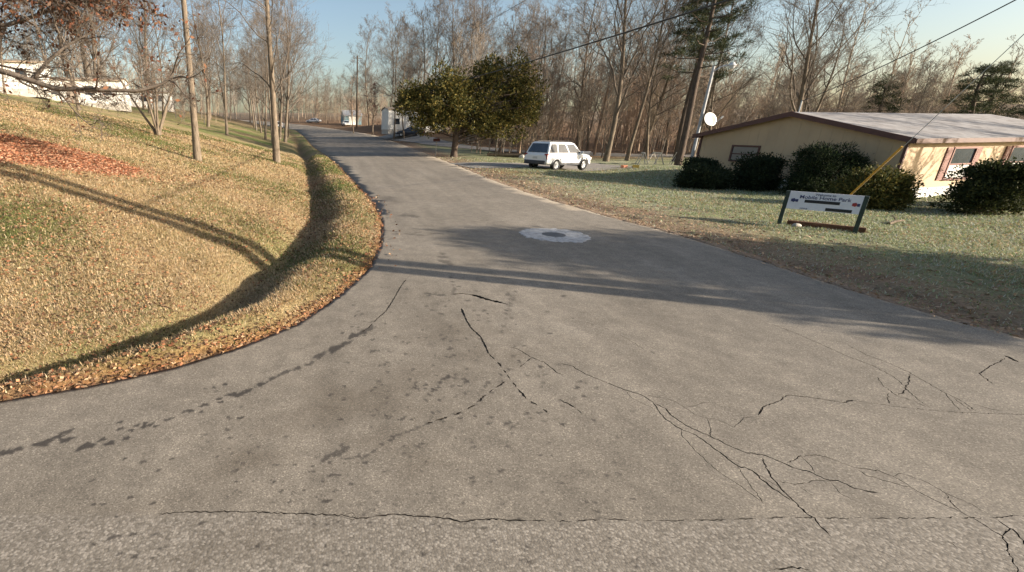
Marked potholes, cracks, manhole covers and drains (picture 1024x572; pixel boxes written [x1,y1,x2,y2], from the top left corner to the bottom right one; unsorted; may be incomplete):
crack [758,334,1024,415]
manhole cover [519,228,591,243]
crack [564,364,1024,572]
crack [362,280,406,332]
crack [427,293,581,424]
